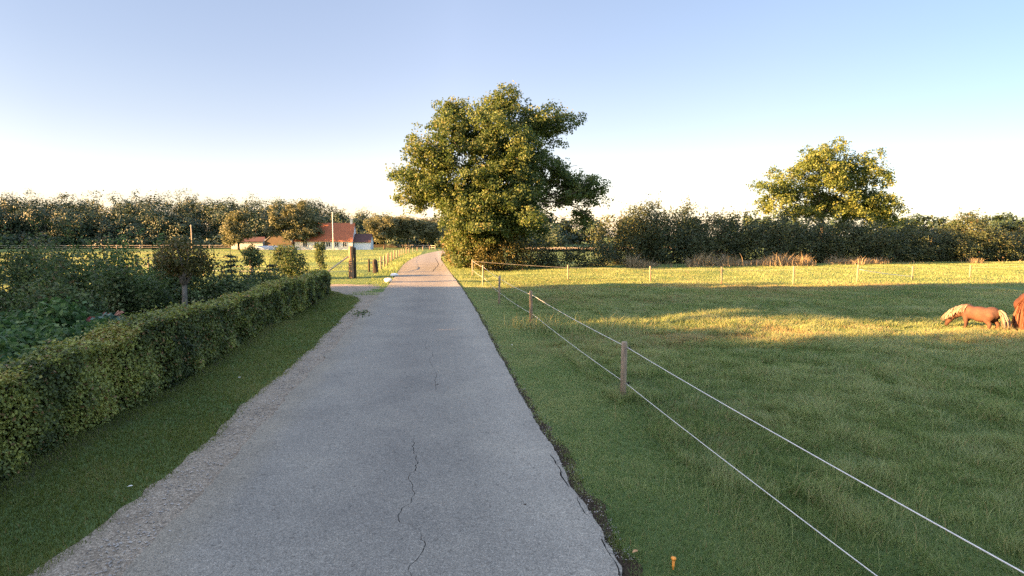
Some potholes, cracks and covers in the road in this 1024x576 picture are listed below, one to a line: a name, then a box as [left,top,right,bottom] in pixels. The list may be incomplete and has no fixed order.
crack [398,441,426,576]
